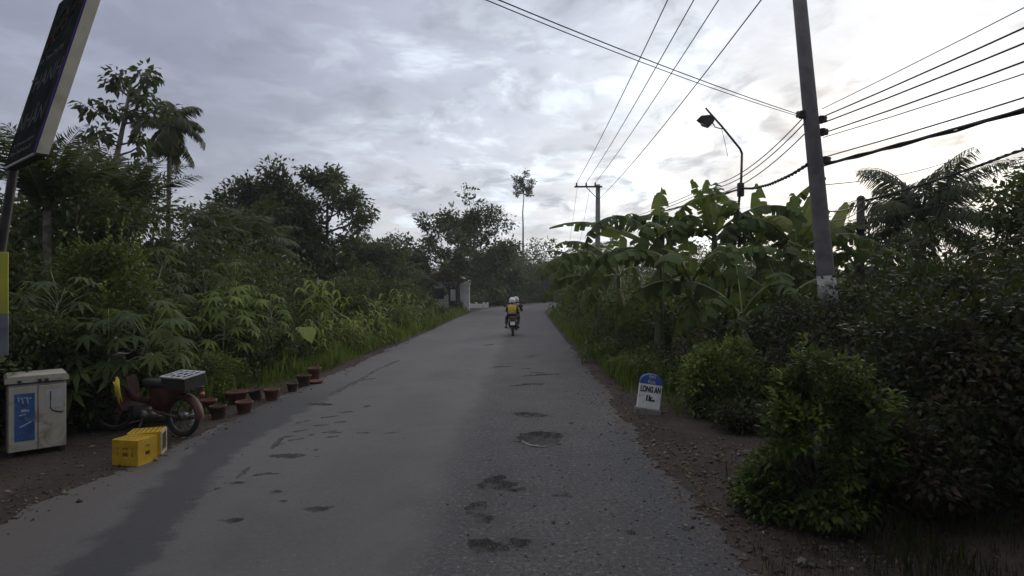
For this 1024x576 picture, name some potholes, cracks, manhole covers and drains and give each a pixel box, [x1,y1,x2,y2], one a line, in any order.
pothole [513,431,564,448]
pothole [458,501,496,524]
crack [330,360,399,394]
pothole [476,474,526,492]
pothole [467,538,536,554]
